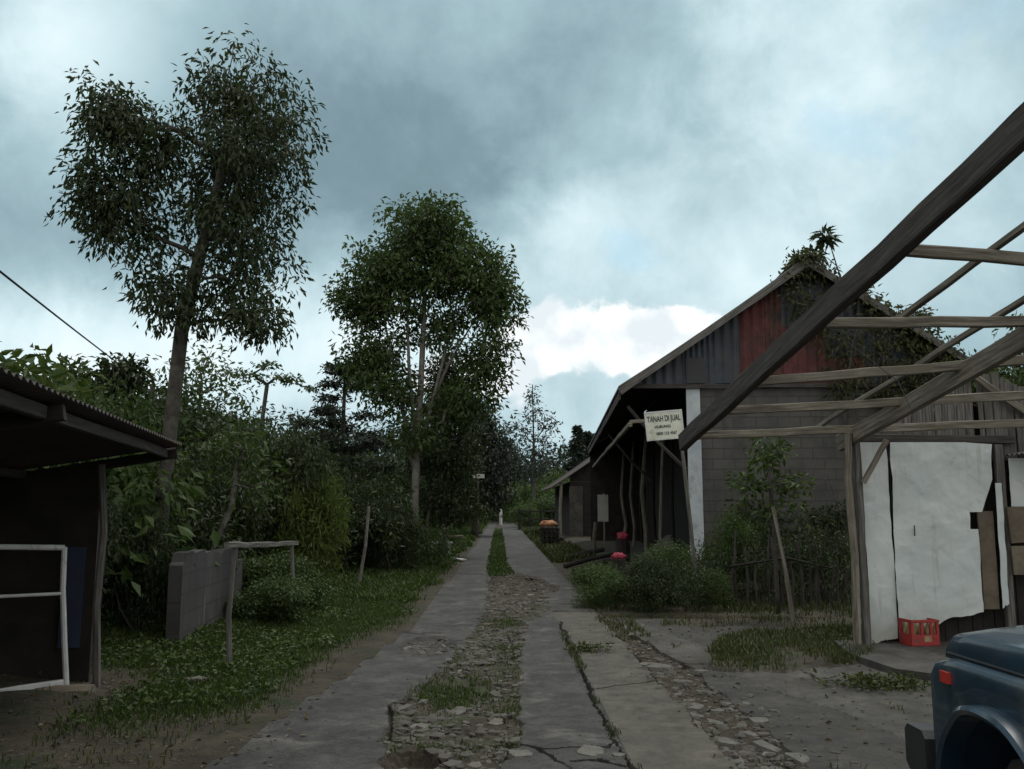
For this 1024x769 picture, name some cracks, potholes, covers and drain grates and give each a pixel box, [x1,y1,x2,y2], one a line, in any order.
crack [493,622,636,769]
